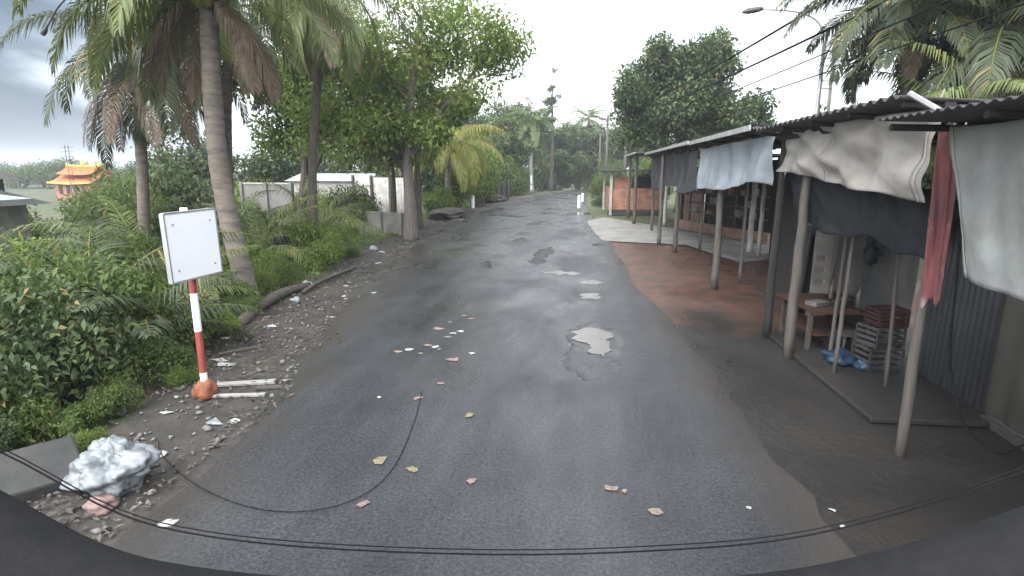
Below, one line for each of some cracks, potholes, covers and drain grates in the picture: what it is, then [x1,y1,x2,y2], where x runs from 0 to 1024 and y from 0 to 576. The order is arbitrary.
pothole [561,321,625,381]
pothole [528,247,555,265]
